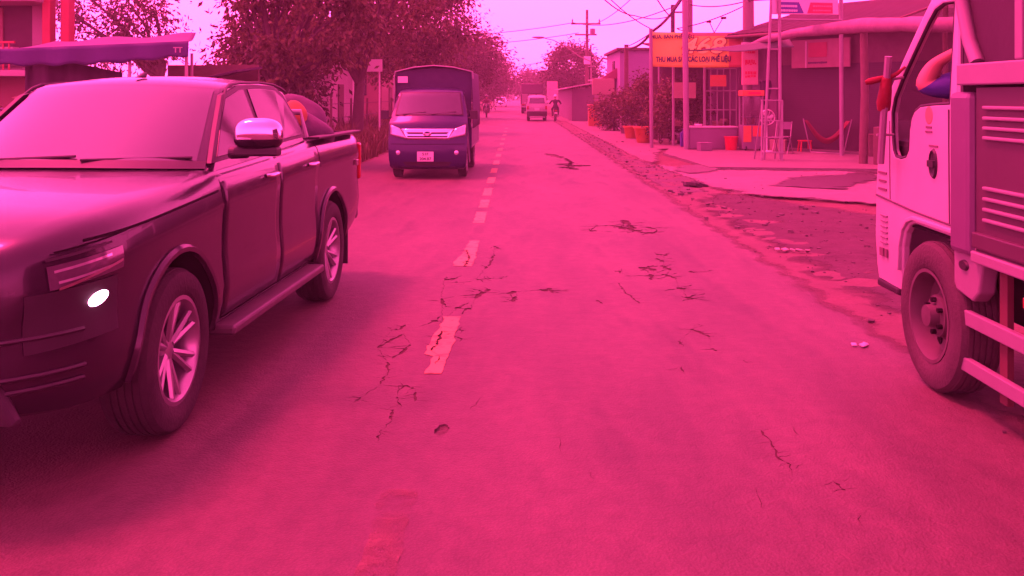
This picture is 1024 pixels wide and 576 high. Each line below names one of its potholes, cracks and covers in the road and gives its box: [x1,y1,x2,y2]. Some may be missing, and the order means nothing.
crack [755,426,805,470]
crack [347,246,564,442]
crack [678,324,717,351]
pothole [434,424,450,435]
crack [582,220,664,235]
crack [596,252,708,304]
crack [556,158,591,170]
